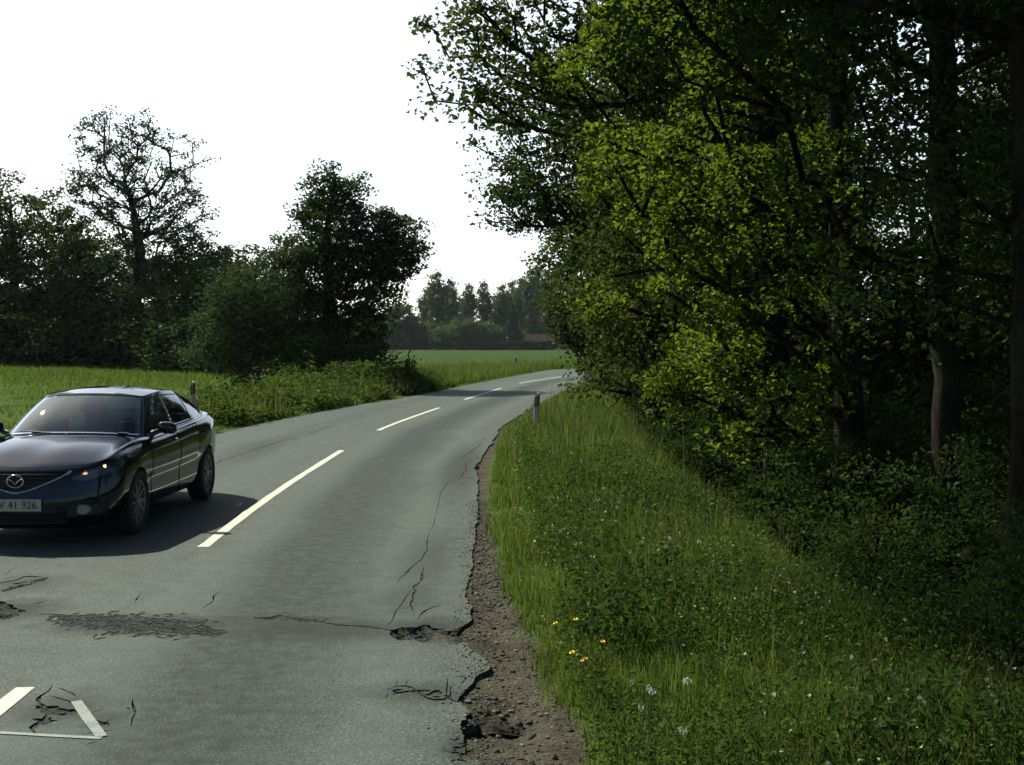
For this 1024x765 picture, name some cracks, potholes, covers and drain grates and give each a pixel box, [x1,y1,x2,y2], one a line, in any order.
pothole [461,712,477,740]
crack [29,686,110,743]
crack [389,441,484,624]
crack [386,678,457,702]
pothole [0,601,25,620]
pothole [389,625,463,643]
crack [2,571,228,641]
